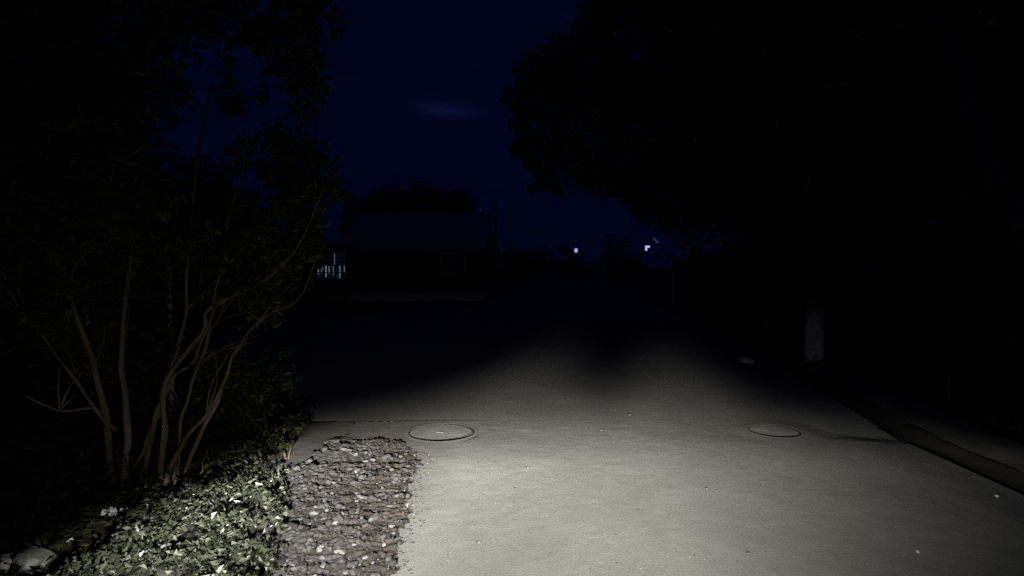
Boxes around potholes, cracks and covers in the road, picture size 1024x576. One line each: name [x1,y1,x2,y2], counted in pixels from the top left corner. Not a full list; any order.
manhole cover [403,422,479,442]
manhole cover [742,423,807,439]
